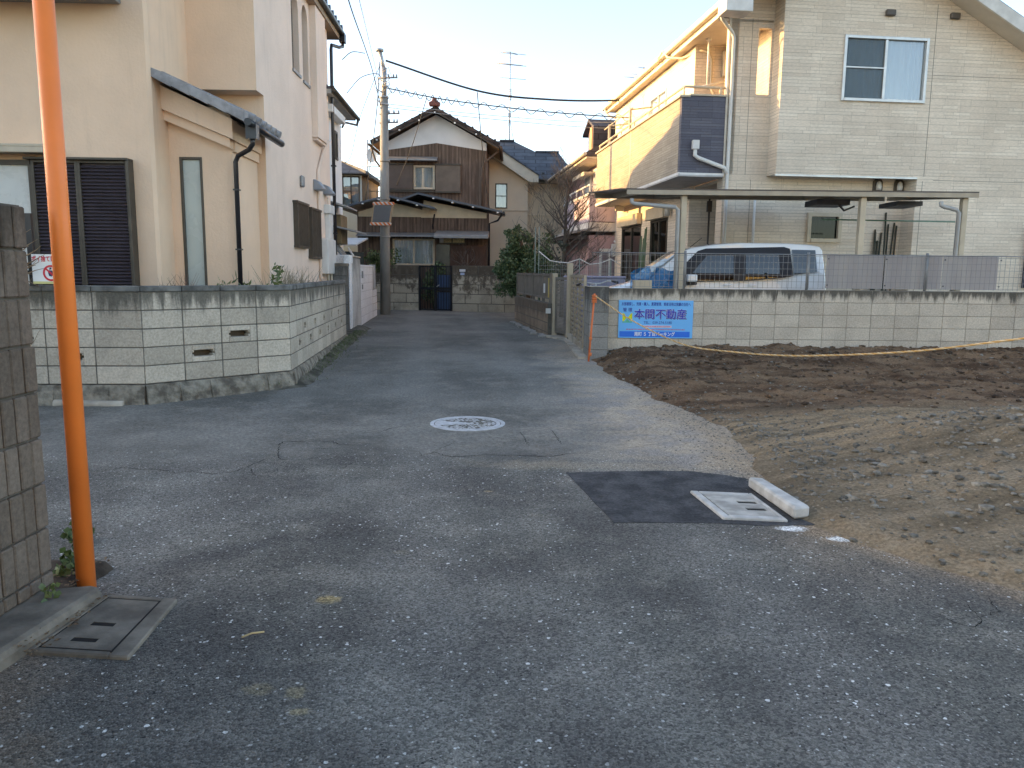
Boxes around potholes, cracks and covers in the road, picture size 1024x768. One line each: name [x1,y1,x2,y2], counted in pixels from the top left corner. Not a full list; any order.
crack [109,440,363,481]
manhole cover [430,416,505,431]
crack [916,598,1000,627]
